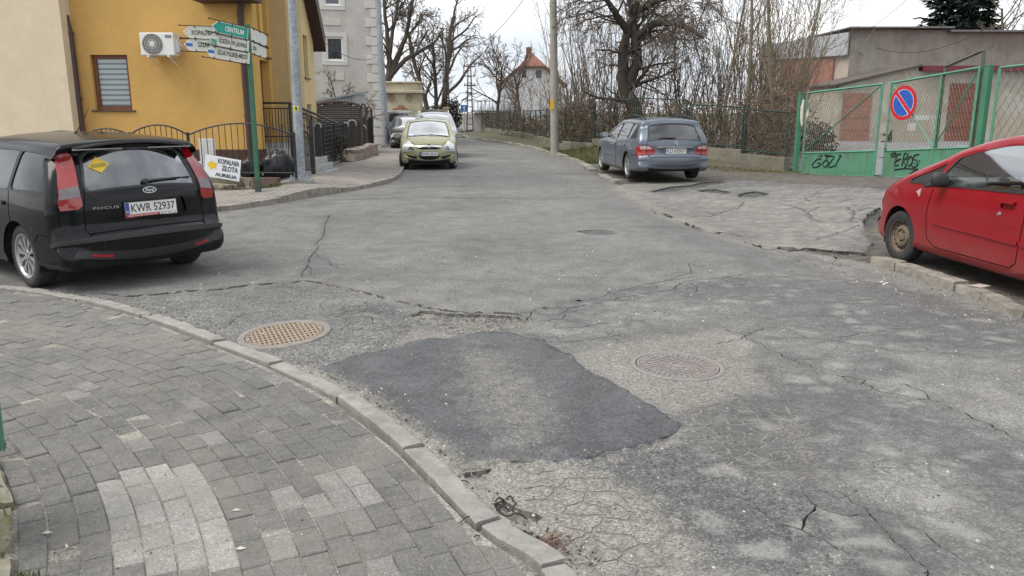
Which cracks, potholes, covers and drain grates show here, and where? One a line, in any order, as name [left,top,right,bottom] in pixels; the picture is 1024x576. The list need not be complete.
manhole cover [630,352,725,381]
crack [716,326,1023,442]
crack [704,185,882,240]
pothole [651,181,724,192]
crack [678,399,963,576]
crack [651,208,866,256]
manhole cover [237,320,331,349]
crack [100,206,818,343]
